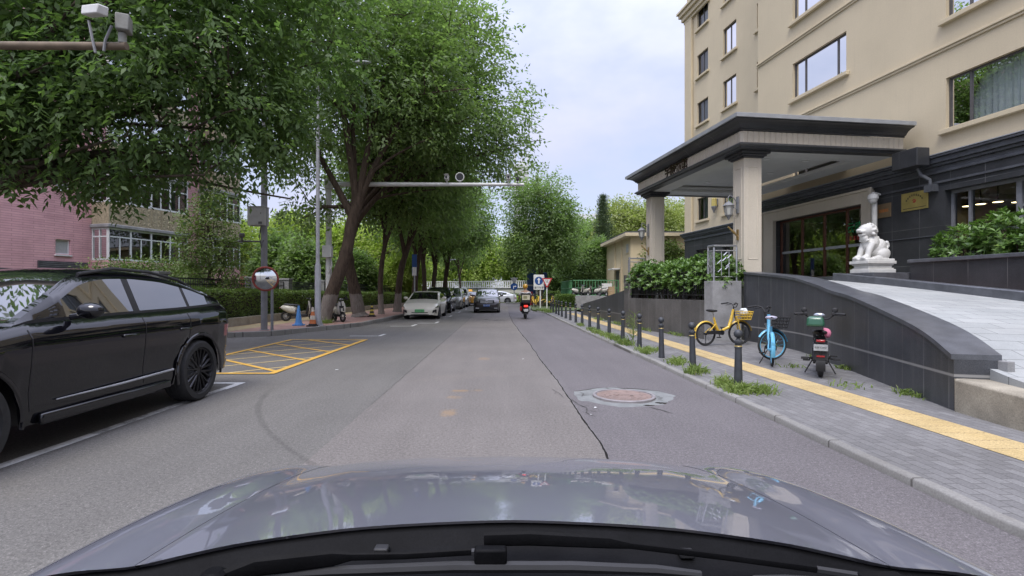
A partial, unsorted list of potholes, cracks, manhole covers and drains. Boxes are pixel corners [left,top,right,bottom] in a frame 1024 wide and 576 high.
crack [475,314,624,459]
manhole cover [574,387,675,407]
